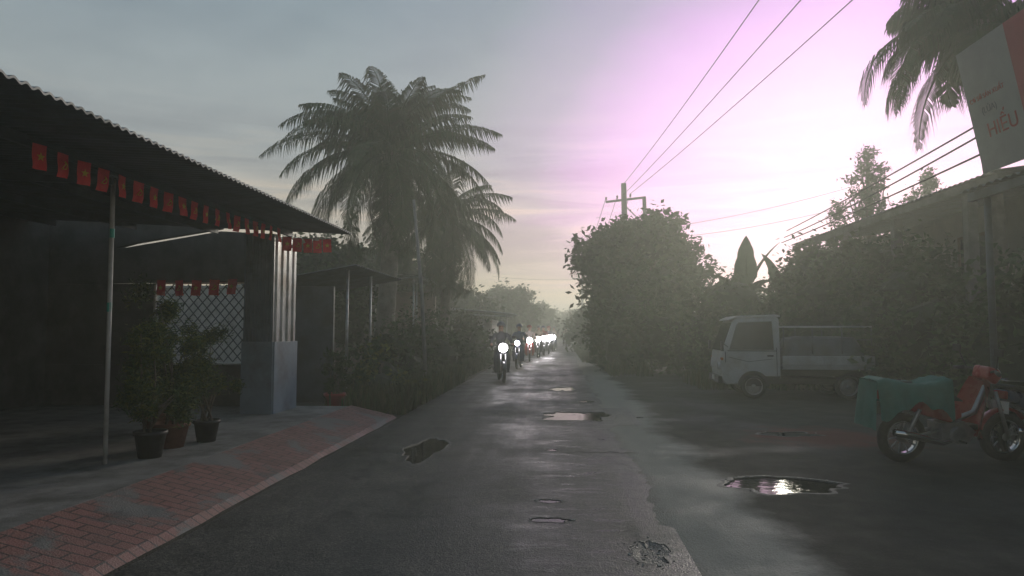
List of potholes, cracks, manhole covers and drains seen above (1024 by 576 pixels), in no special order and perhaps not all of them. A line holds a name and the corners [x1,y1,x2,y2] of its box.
pothole [717,475,850,496]
pothole [538,410,617,422]
pothole [397,436,452,466]
pothole [624,536,675,569]
